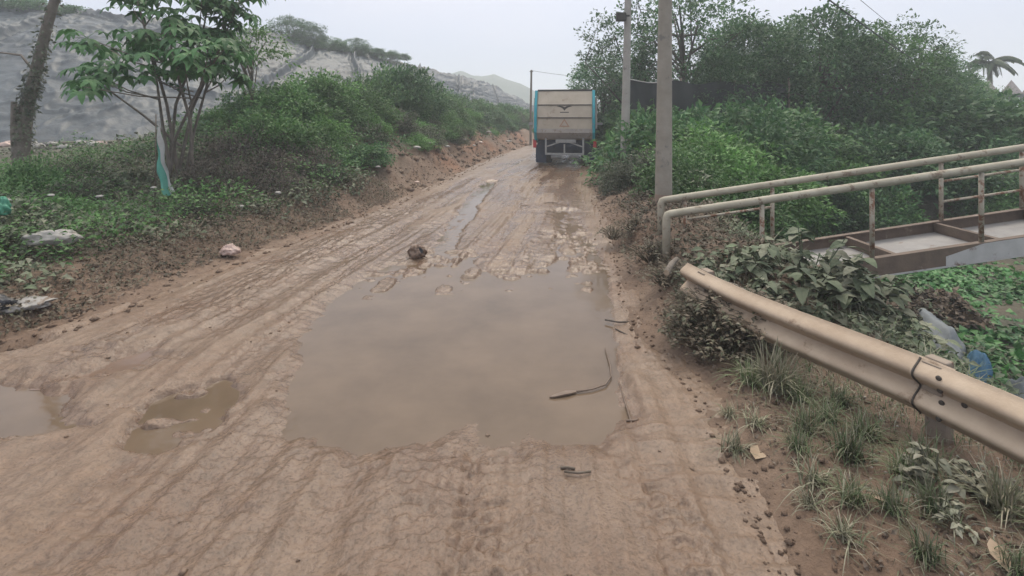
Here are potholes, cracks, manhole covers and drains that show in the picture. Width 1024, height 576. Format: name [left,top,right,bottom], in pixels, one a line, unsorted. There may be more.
pothole [103,370,249,461]
pothole [0,367,103,441]
